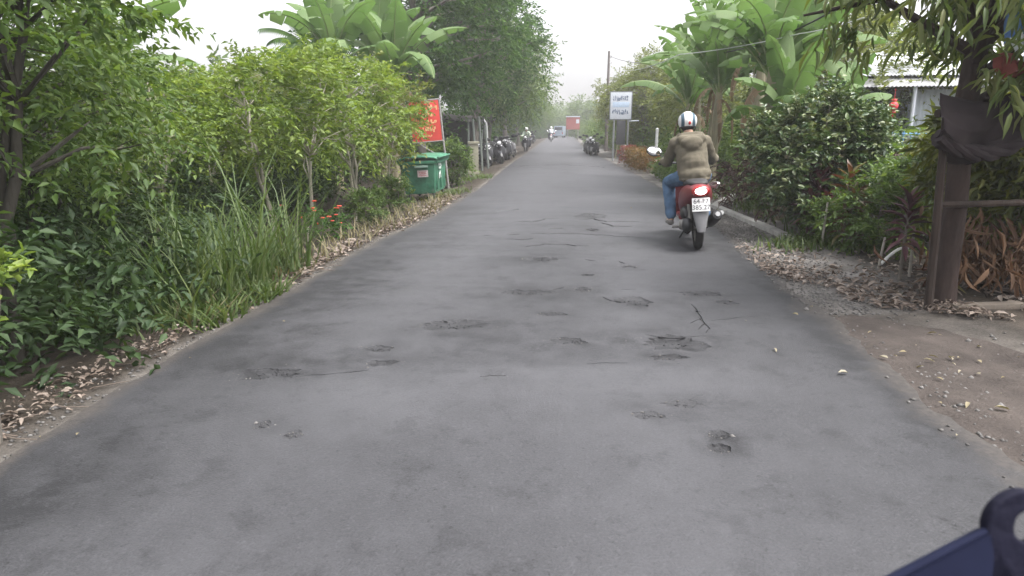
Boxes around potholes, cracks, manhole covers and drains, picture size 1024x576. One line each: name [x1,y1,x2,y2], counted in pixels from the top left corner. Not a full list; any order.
pothole [237,368,301,380]
pothole [281,430,303,439]
pothole [251,420,272,430]
pothole [613,296,654,308]
pothole [630,411,666,419]
pothole [422,319,492,331]
crack [649,304,756,339]
pothole [708,430,730,440]
pothole [642,334,712,352]
pothole [549,337,588,345]
pothole [706,443,731,453]
